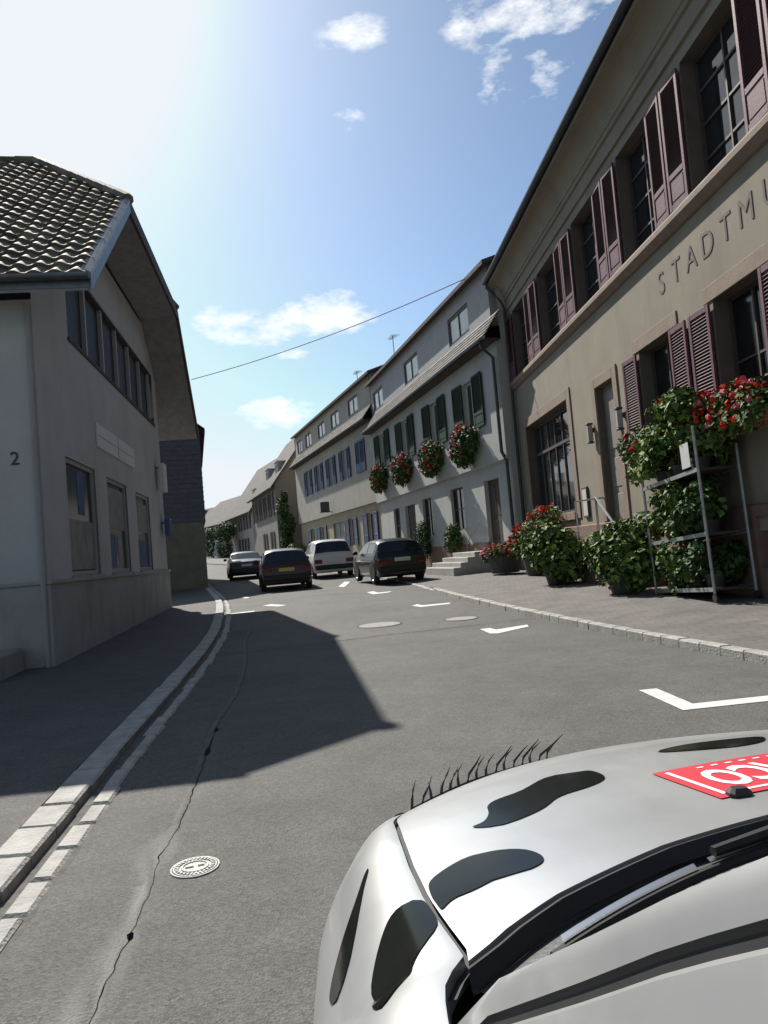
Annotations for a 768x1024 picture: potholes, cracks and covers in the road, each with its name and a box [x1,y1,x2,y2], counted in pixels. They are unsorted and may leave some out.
manhole cover [170,856,220,879]
crack [89,632,251,1024]
